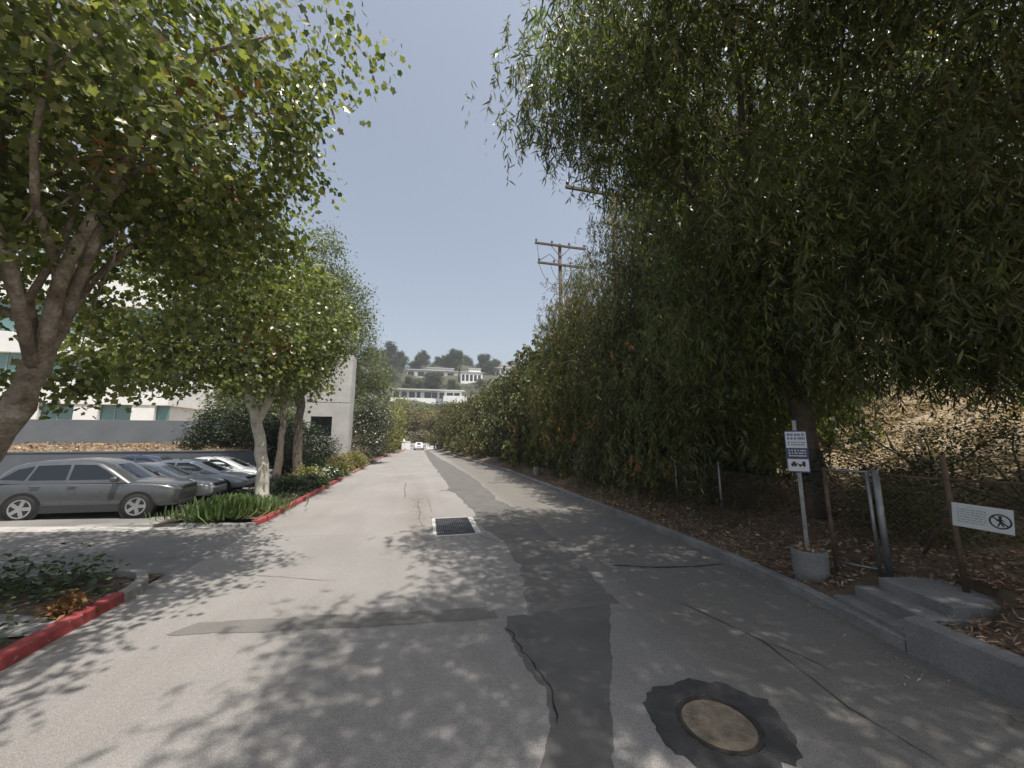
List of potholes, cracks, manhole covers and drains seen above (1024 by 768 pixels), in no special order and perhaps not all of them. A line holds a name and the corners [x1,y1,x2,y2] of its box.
crack [680,602,942,762]
drain grate [432,517,481,537]
manhole cover [643,678,803,768]
crack [504,627,559,725]
